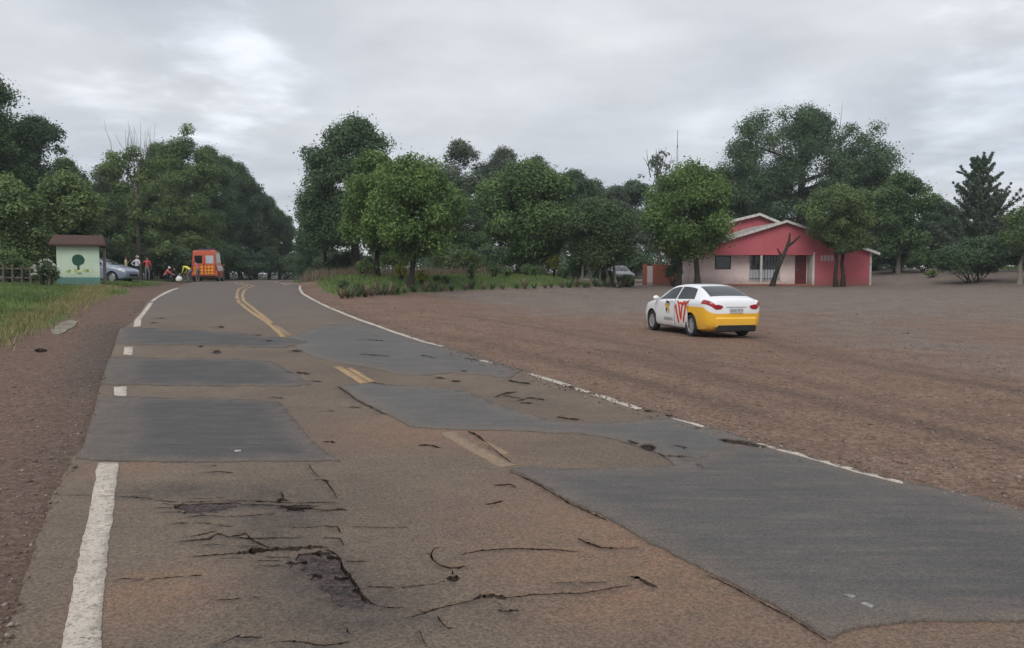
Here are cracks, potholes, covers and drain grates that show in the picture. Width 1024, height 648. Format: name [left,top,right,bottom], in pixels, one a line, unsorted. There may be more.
crack [111,465,657,645]
pothole [174,502,242,514]
pothole [295,551,367,608]
